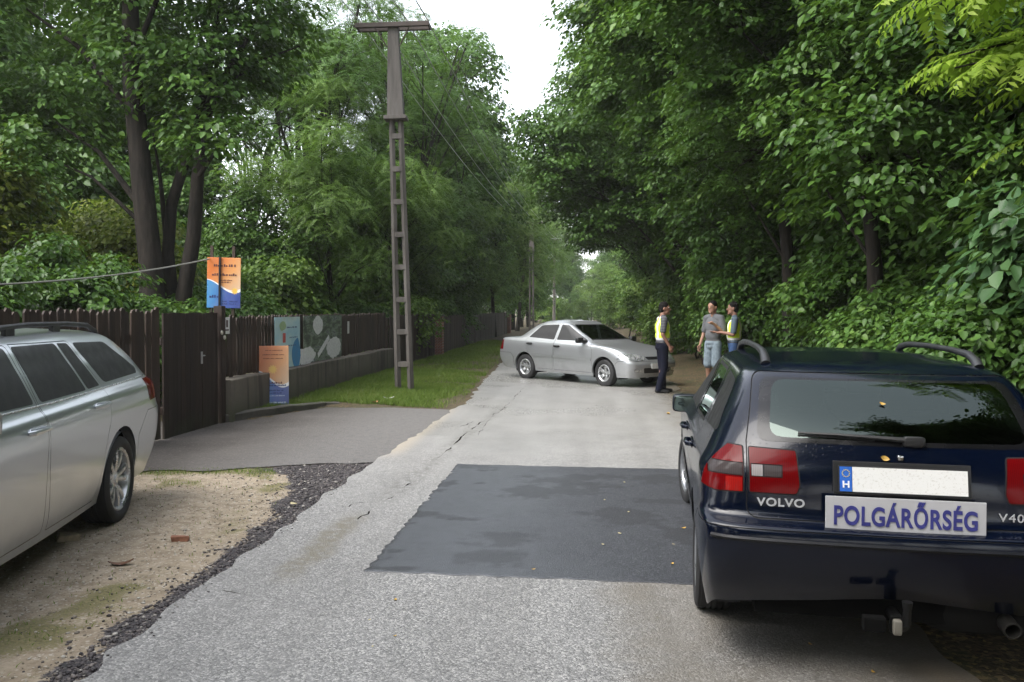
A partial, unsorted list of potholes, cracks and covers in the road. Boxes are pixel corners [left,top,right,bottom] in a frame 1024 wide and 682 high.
crack [437,391,521,459]
